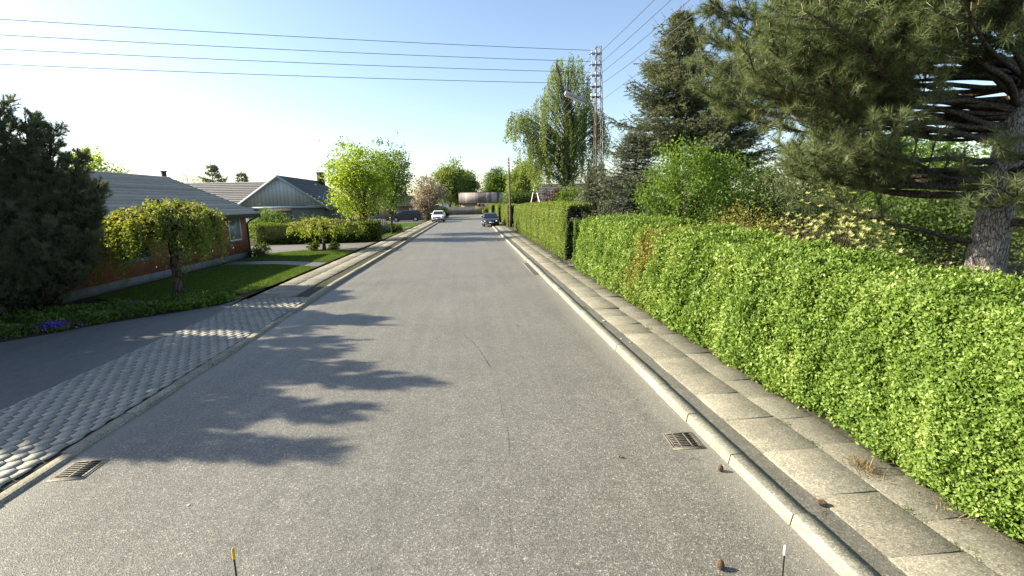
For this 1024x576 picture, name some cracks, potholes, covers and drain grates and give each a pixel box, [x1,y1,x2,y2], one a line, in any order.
drain grate [663,432,707,450]
drain grate [46,459,109,482]
